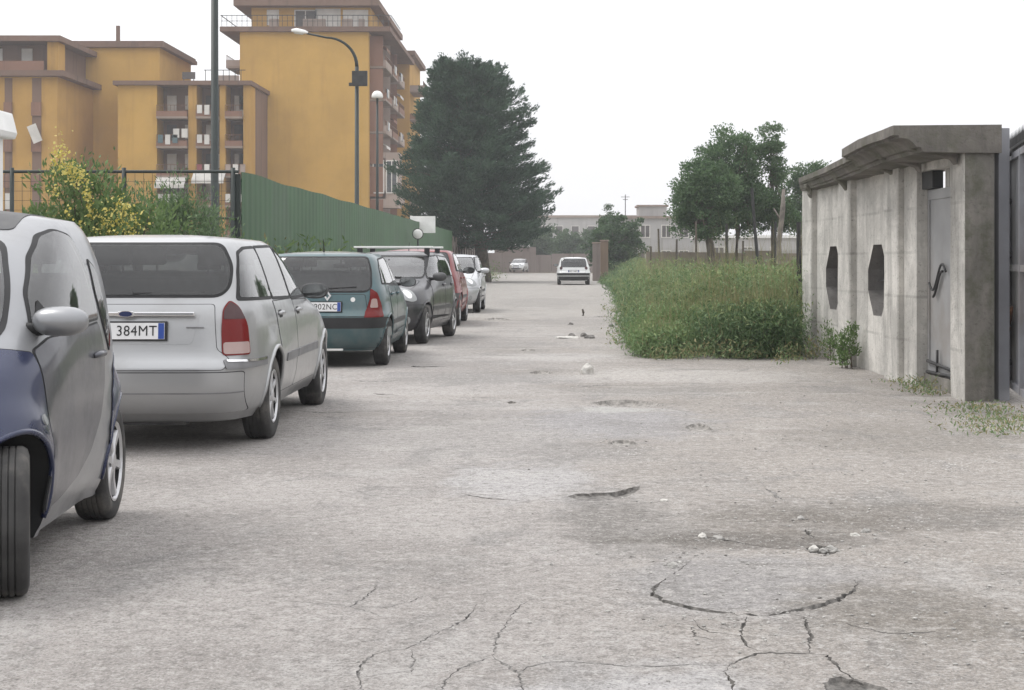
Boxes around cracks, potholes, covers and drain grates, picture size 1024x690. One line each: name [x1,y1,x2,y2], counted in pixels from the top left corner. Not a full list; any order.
pothole [567,486,640,501]
crack [356,597,724,690]
crack [650,562,936,690]
pothole [685,423,713,432]
